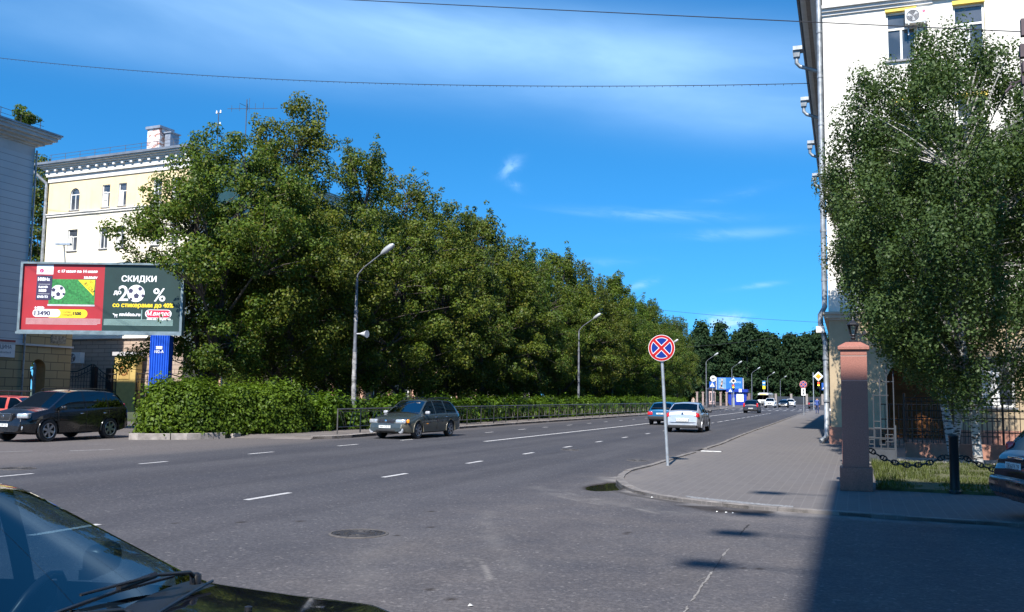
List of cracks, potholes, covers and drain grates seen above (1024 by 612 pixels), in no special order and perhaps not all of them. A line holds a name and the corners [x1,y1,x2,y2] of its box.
manhole cover [329,529,389,539]
crack [683,525,748,612]
